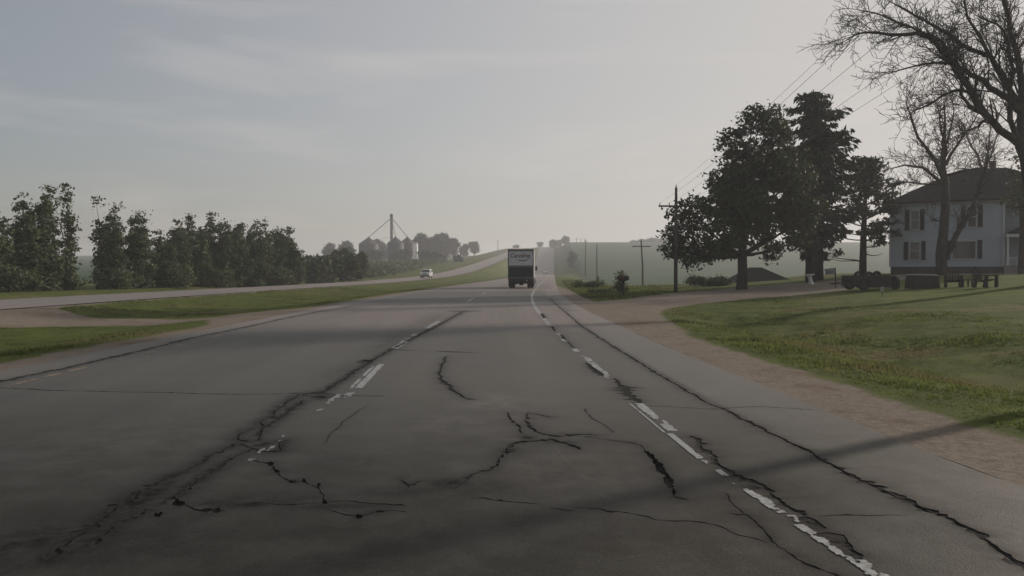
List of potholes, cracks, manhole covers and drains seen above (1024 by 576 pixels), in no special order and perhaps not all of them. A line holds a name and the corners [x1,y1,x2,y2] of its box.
crack [452,409,839,576]
crack [437,351,476,400]
crack [184,460,420,517]
crack [13,388,364,444]
